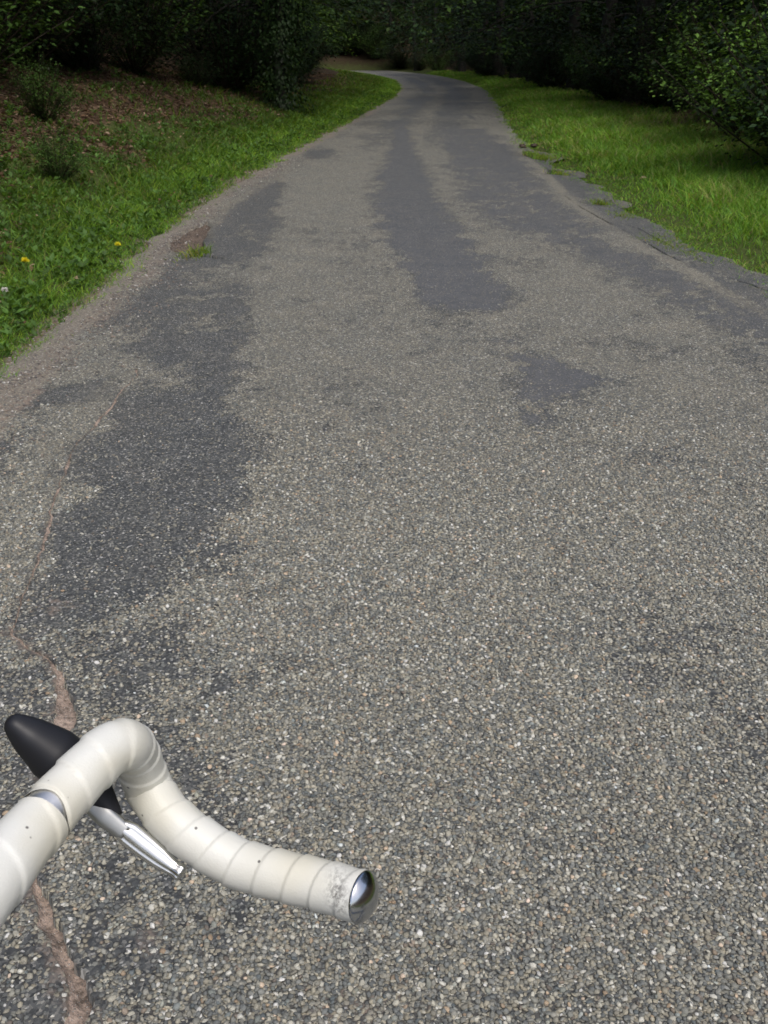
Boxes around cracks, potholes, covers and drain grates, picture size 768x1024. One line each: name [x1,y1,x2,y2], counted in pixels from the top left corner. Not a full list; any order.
pothole [148,219,222,256]
crack [0,361,151,1024]
